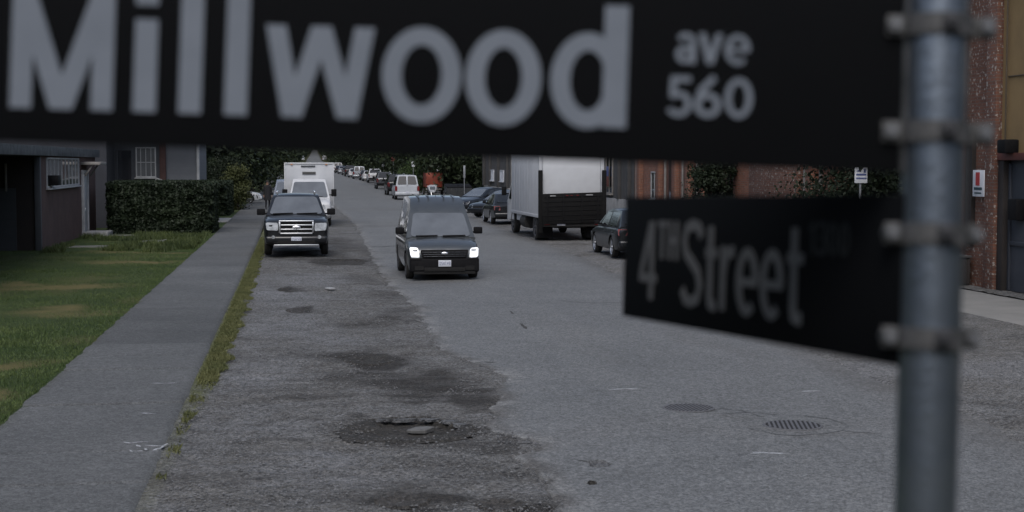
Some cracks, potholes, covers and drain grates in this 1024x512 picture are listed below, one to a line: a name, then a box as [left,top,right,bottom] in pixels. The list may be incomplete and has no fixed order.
crack [719,408,874,436]
pothole [333,416,477,444]
